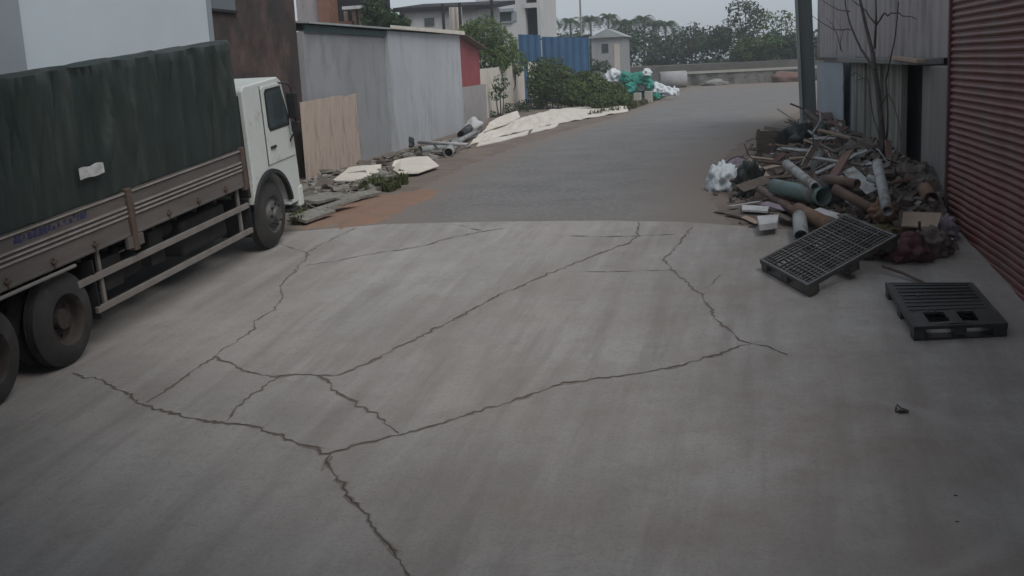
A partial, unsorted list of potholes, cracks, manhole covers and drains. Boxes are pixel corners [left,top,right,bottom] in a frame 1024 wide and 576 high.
crack [72,222,787,576]
